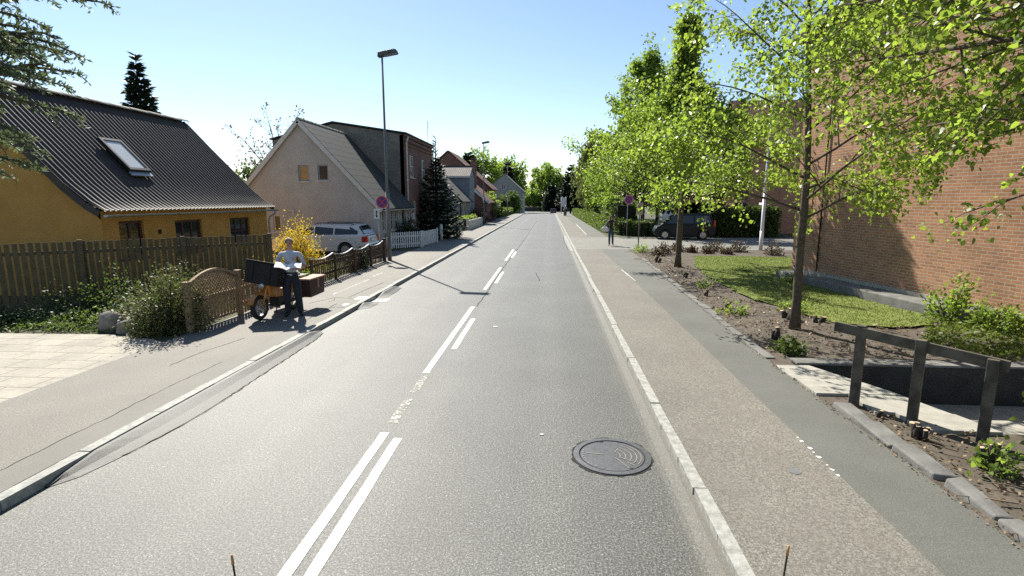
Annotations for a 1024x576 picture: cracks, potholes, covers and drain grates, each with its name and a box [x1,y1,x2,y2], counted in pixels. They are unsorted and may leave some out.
manhole cover [571,437,654,477]
